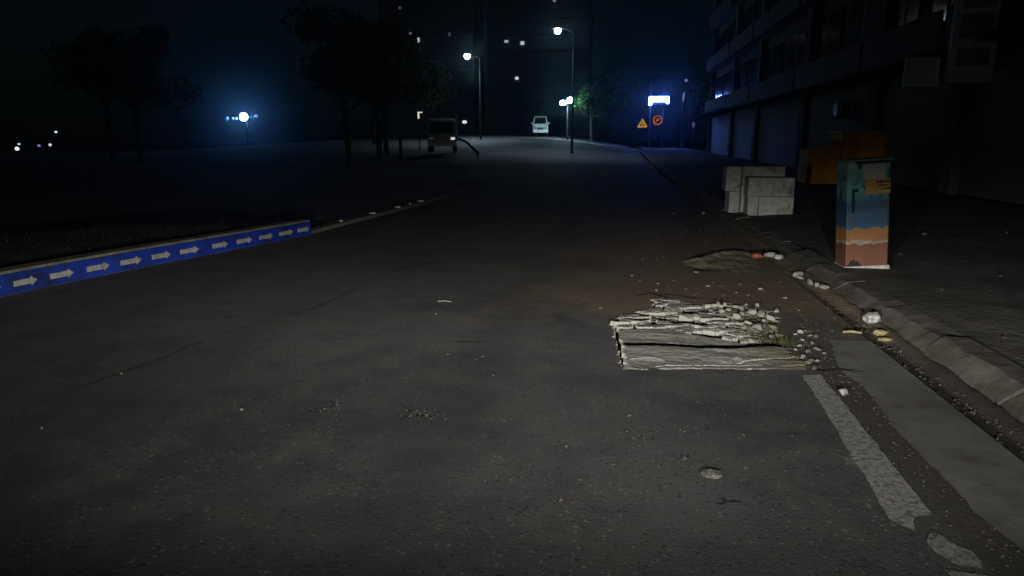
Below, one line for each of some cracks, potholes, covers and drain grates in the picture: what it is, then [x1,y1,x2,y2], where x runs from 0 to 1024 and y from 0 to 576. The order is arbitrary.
pothole [682,250,759,276]
pothole [609,298,812,370]
